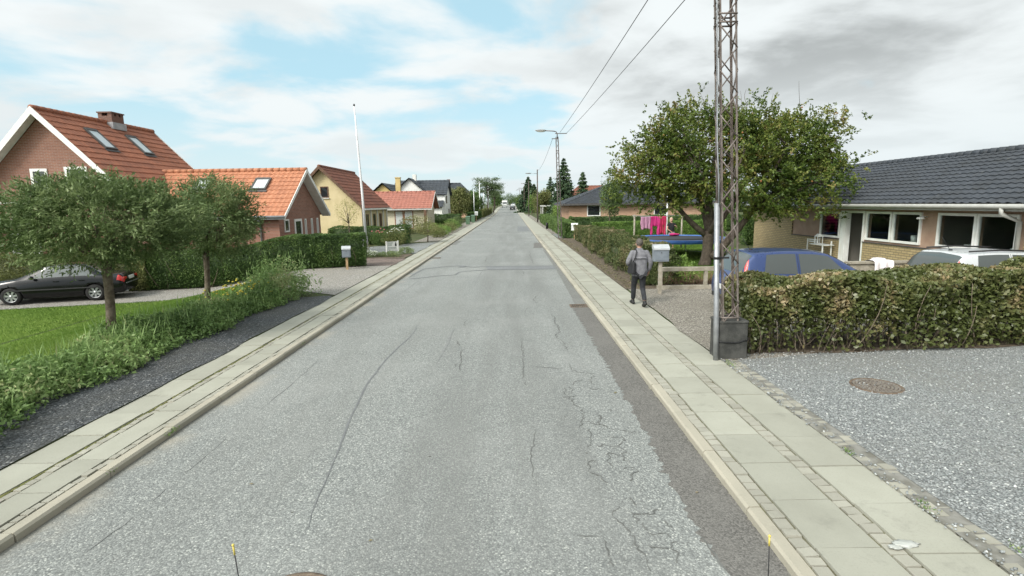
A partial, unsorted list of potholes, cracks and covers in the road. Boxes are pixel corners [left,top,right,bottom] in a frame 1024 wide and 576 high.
manhole cover [849,378,905,394]
crack [525,296,679,571]
crack [256,326,417,528]
